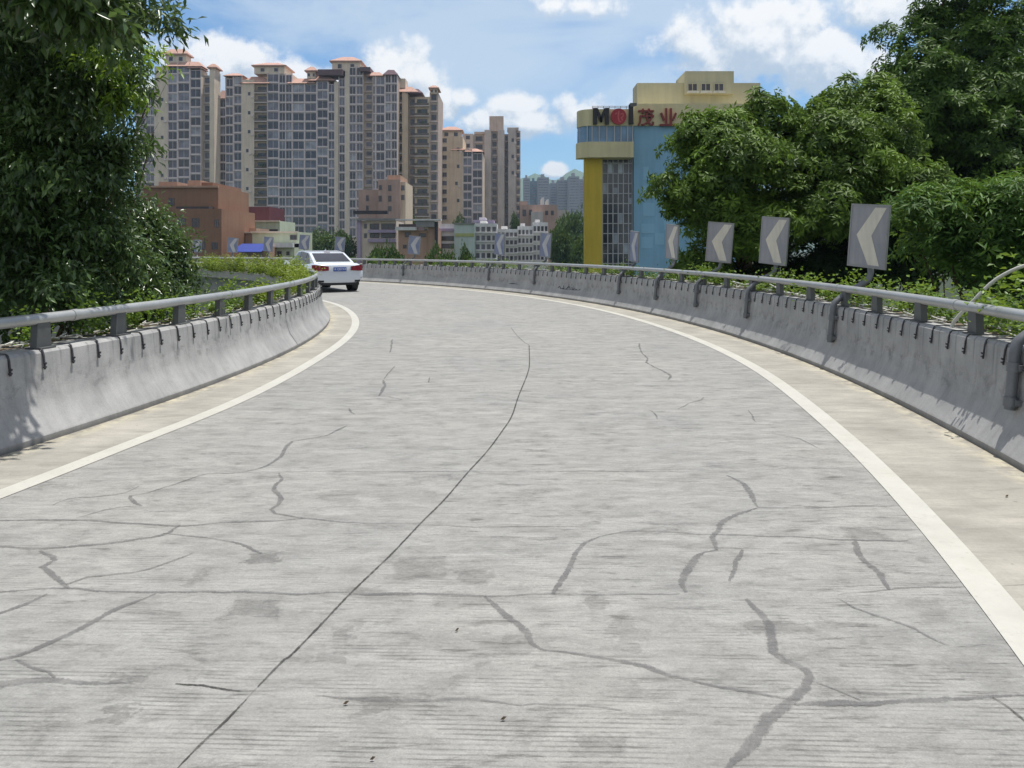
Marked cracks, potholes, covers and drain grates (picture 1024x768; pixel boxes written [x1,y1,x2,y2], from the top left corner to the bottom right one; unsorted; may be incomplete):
crack [175,346,680,768]
